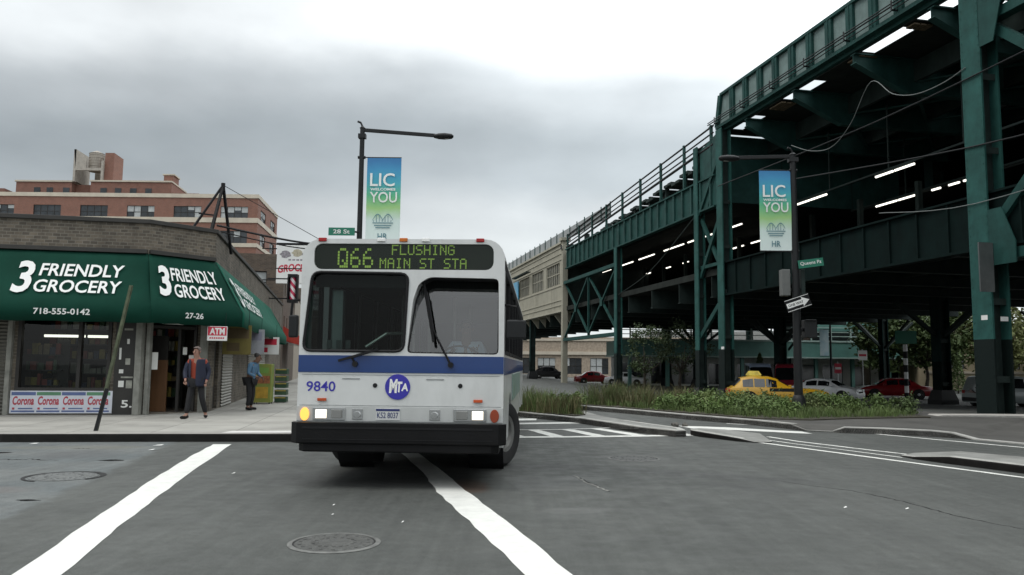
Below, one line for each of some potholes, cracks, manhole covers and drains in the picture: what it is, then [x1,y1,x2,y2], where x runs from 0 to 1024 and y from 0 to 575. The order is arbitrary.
crack [575,476,609,491]
manhole cover [21,471,107,481]
manhole cover [287,533,381,553]
